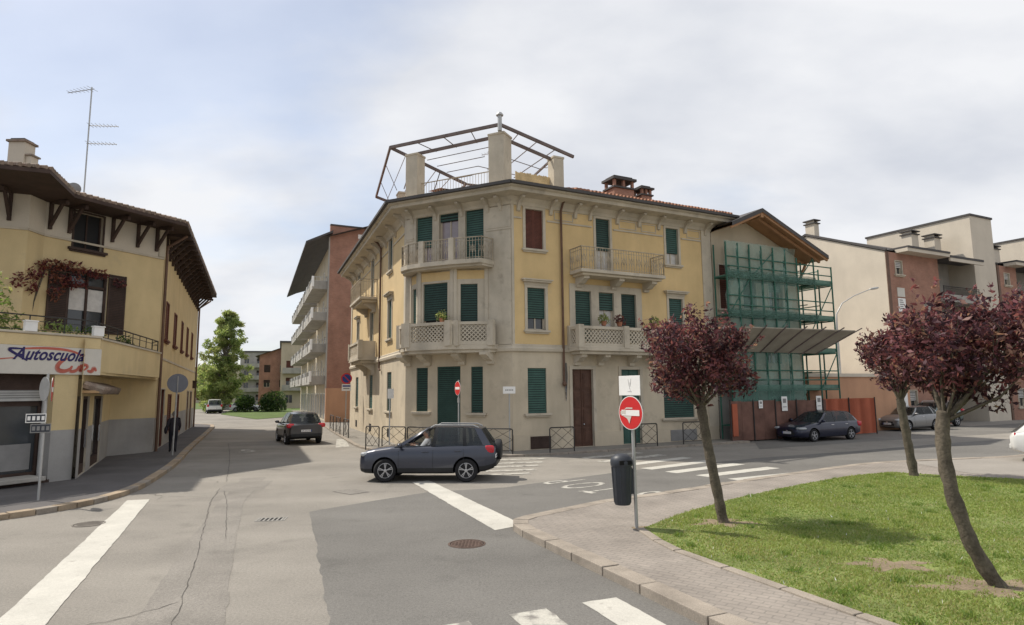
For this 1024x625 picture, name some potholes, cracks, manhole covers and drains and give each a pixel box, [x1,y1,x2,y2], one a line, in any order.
manhole cover [448,539,486,549]
crack [87,475,220,625]
